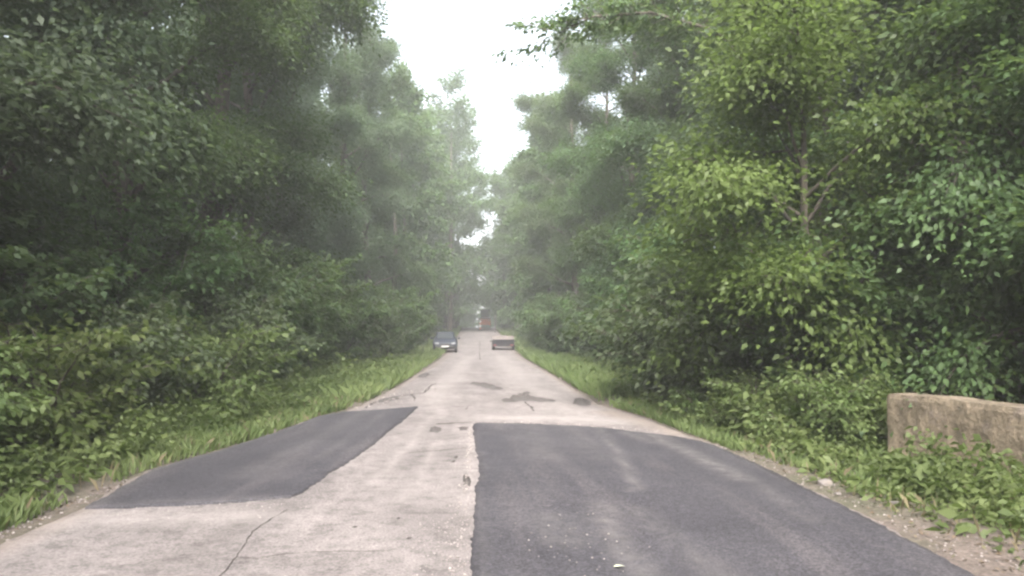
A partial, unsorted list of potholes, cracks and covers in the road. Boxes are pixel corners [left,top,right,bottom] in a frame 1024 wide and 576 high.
crack [219,509,393,576]
pothole [501,391,556,402]
crack [365,384,434,408]
pothole [572,397,591,406]
pothole [470,382,503,390]
